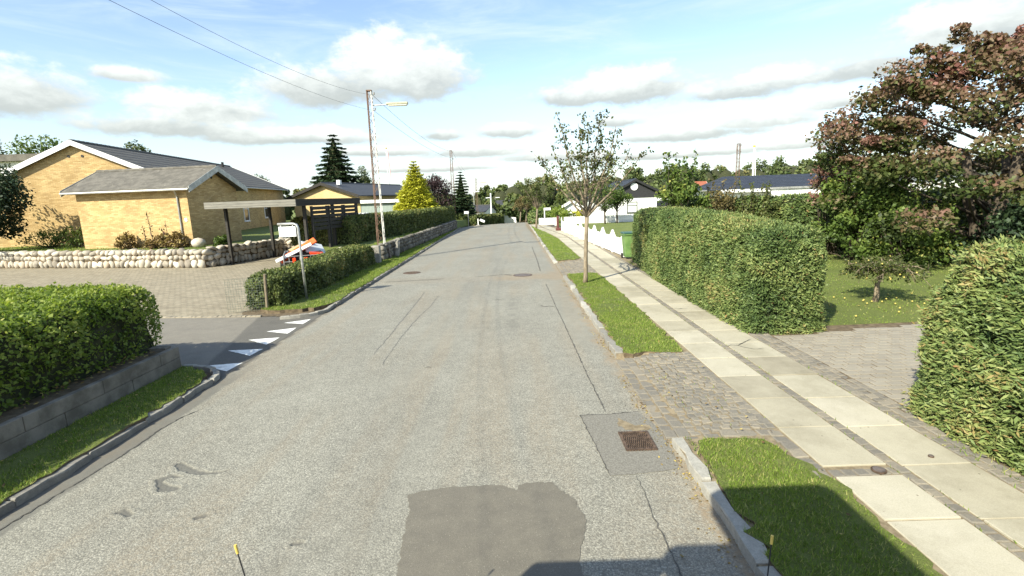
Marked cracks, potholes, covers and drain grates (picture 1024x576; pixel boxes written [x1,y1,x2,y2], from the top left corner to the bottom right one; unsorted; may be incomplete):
pothole [167,459,237,479]
drain grate [618,430,658,451]
pothole [148,471,191,496]
